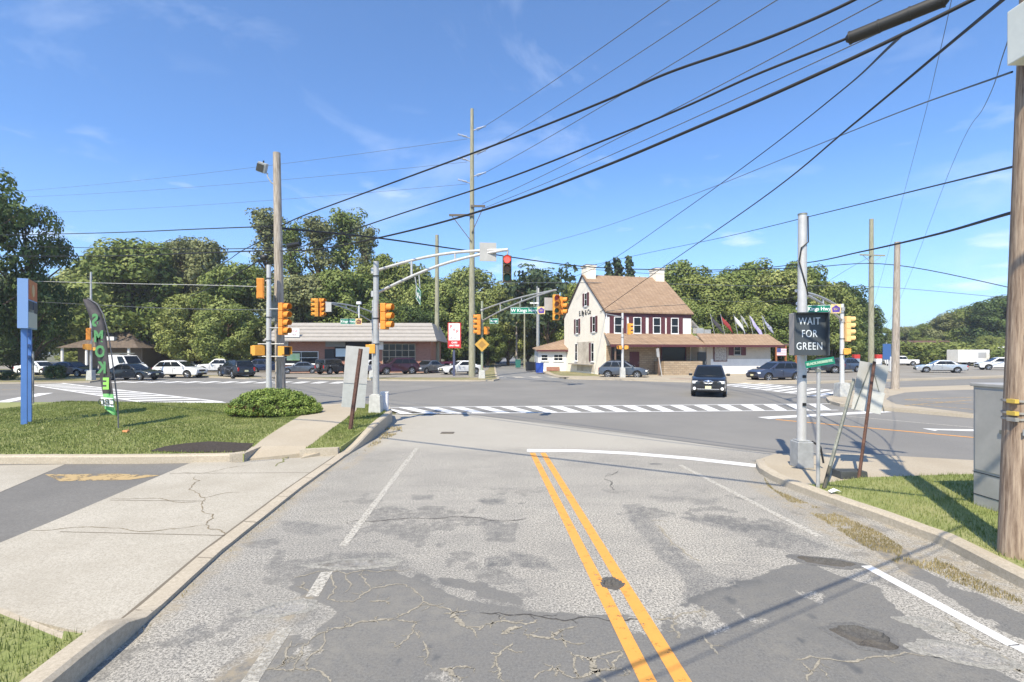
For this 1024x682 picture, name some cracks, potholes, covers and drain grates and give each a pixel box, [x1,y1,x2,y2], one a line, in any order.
pothole [818,622,911,656]
crack [30,465,246,534]
pothole [598,576,626,590]
crack [261,565,631,682]
